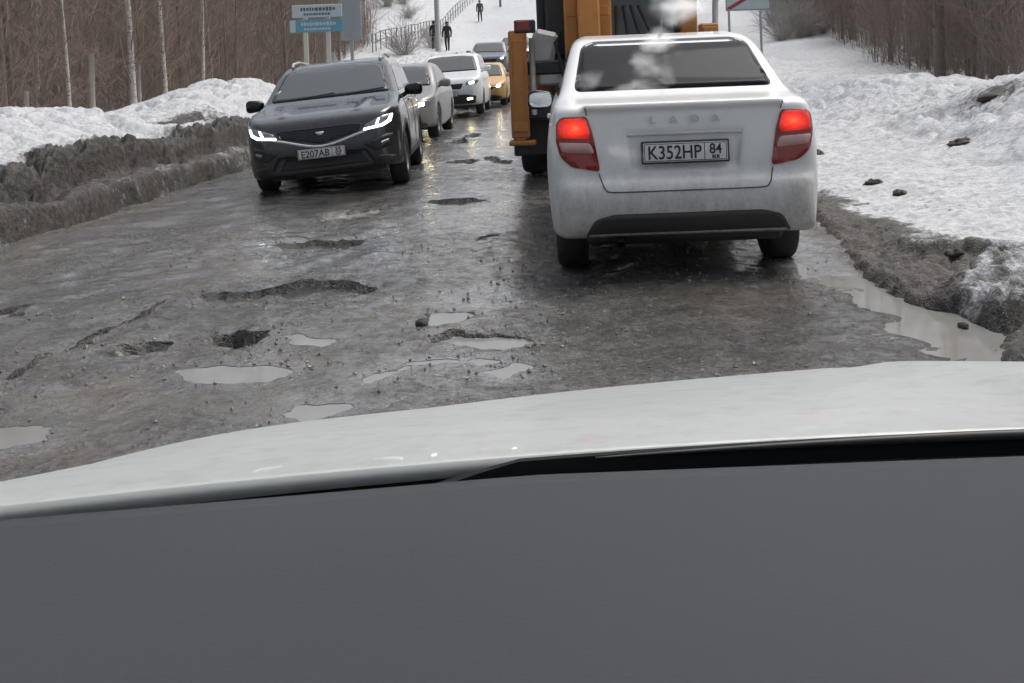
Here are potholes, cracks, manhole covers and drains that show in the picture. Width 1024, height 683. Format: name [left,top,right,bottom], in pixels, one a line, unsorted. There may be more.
pothole [423,197,491,206]
pothole [193,278,378,305]
pothole [425,328,536,350]
pothole [197,329,270,349]
pothole [0,425,53,449]
pothole [173,365,294,384]
pothole [273,239,368,254]
pothole [281,403,355,422]
crack [0,298,169,380]
pothole [425,312,481,326]
pothole [350,365,412,387]
pothole [467,358,501,366]
